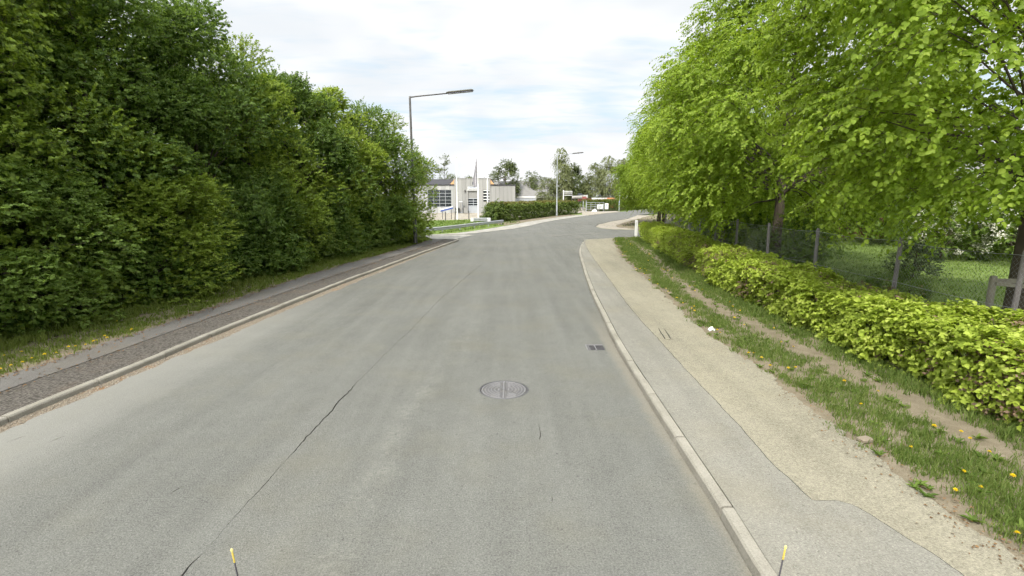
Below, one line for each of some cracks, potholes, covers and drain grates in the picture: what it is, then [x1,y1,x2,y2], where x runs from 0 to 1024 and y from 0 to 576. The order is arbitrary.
crack [181,262,486,576]
manhole cover [479,380,529,399]
